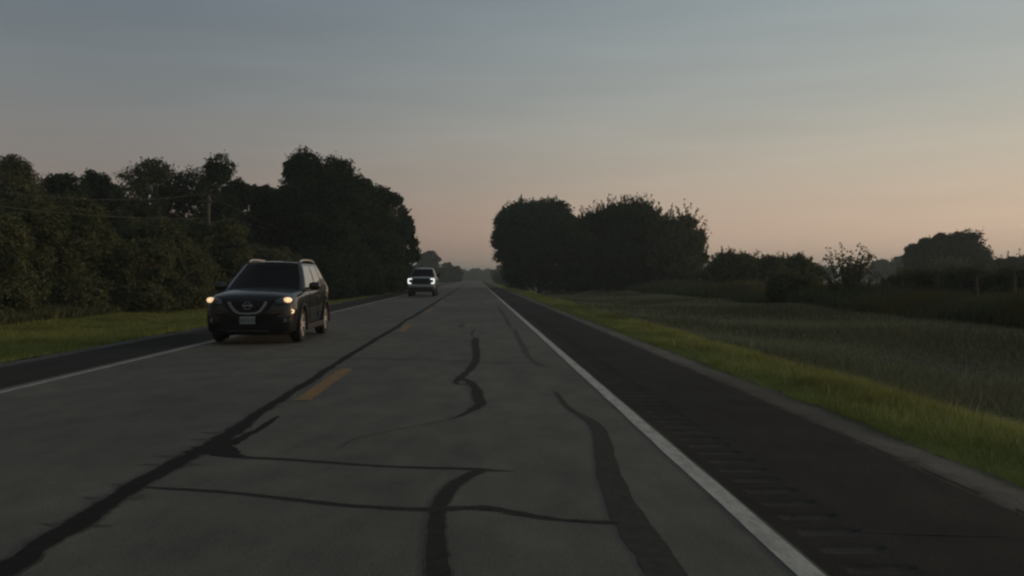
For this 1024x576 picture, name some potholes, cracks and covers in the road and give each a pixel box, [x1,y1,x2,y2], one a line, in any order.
crack [183,307,547,366]
